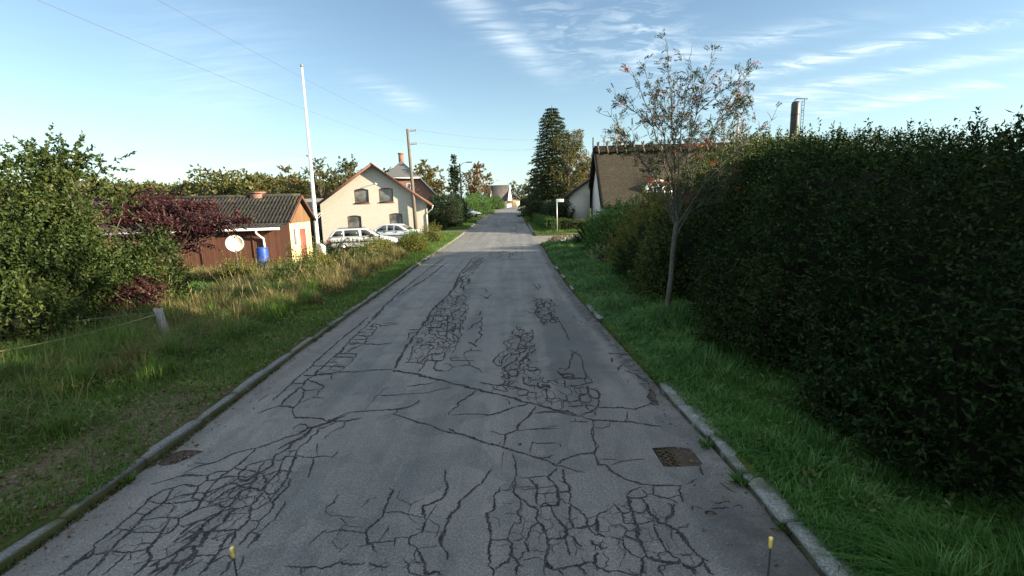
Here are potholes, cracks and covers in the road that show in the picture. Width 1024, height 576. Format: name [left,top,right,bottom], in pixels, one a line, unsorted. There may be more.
drain grate [652,447,702,467]
crack [58,251,741,576]
